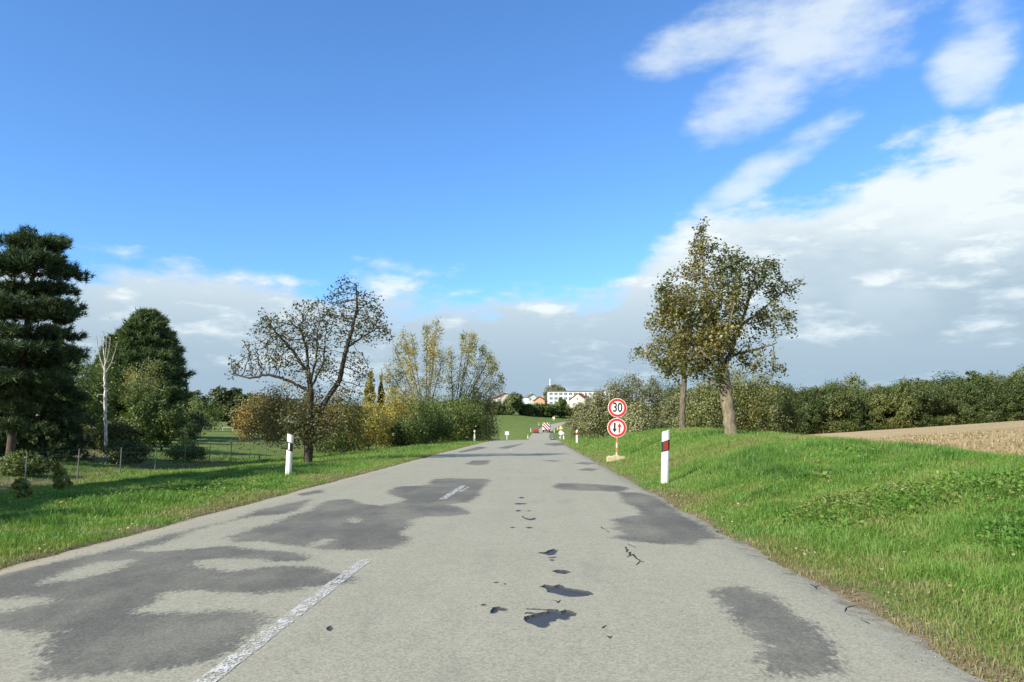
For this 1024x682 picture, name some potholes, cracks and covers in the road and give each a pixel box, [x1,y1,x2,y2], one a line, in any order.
pothole [540,584,594,597]
crack [625,544,643,565]
pothole [524,608,577,628]
